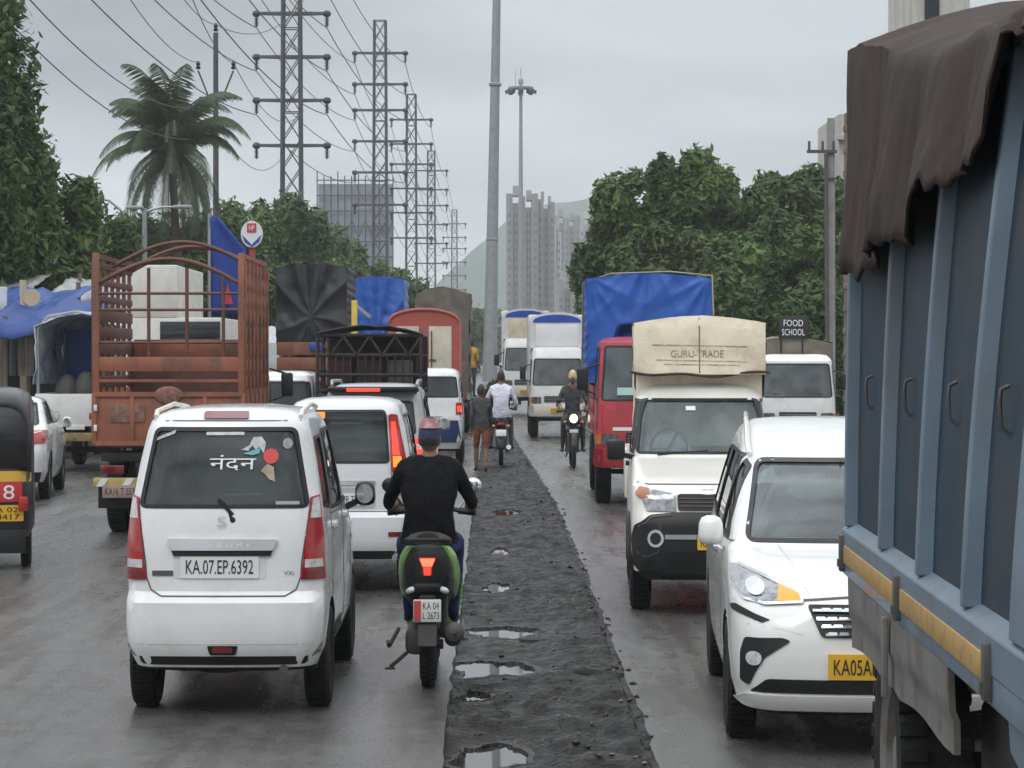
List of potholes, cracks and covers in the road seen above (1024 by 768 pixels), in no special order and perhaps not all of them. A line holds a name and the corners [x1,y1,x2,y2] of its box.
pothole [489,506,527,516]
pothole [444,740,535,768]
pothole [465,624,549,639]
pothole [453,659,544,679]
pothole [456,688,493,702]
pothole [487,544,511,555]
pothole [479,580,513,593]
